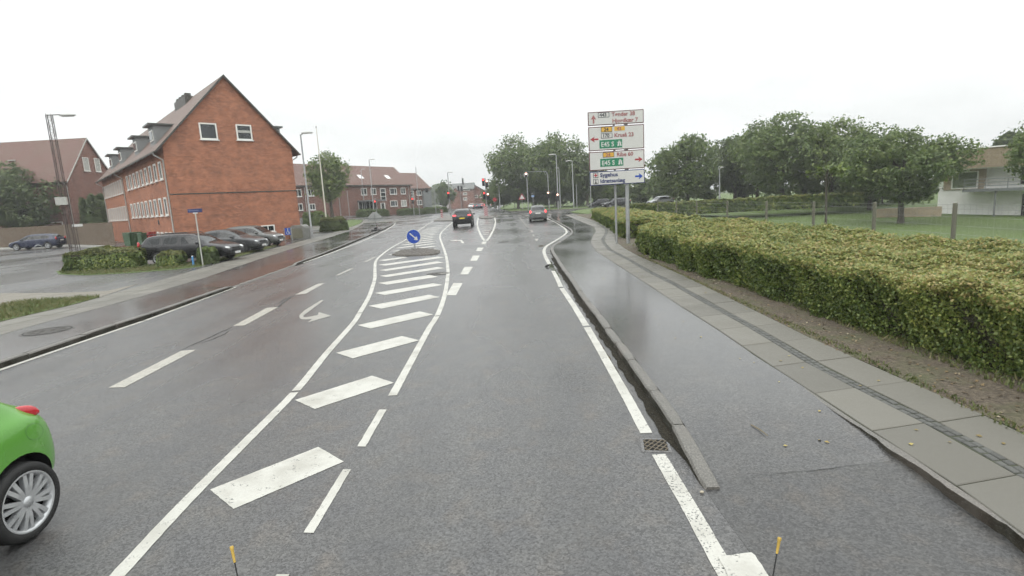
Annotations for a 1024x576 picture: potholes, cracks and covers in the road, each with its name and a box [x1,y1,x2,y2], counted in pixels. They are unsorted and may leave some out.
crack [184,328,230,349]
manhole cover [18,326,75,337]
drain grate [640,438,672,453]
